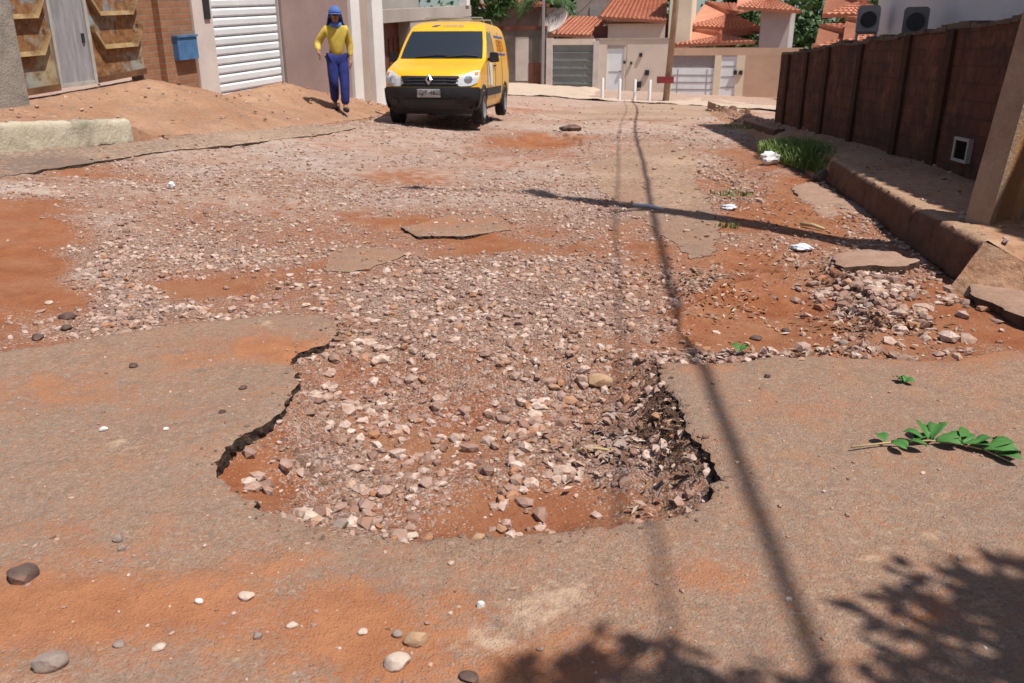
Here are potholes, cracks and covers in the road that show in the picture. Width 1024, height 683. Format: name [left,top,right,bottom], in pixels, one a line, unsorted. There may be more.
pothole [214,325,721,543]
pothole [496,132,585,149]
pothole [675,269,879,355]
